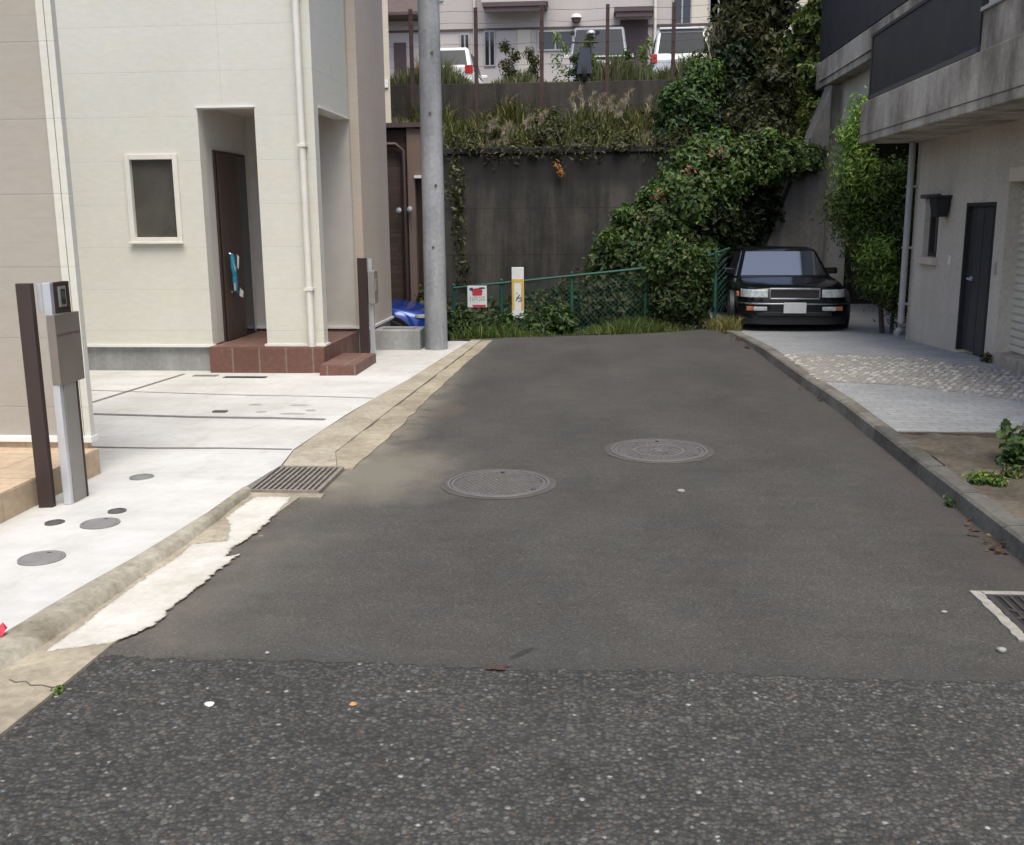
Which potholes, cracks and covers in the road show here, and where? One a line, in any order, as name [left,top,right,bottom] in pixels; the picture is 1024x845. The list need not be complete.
drain grate [249,466,344,493]
manhole cover [604,438,715,464]
utility cover [80,517,120,530]
manhole cover [440,469,557,500]
drain grate [970,590,1024,642]
utility cover [17,550,66,566]
